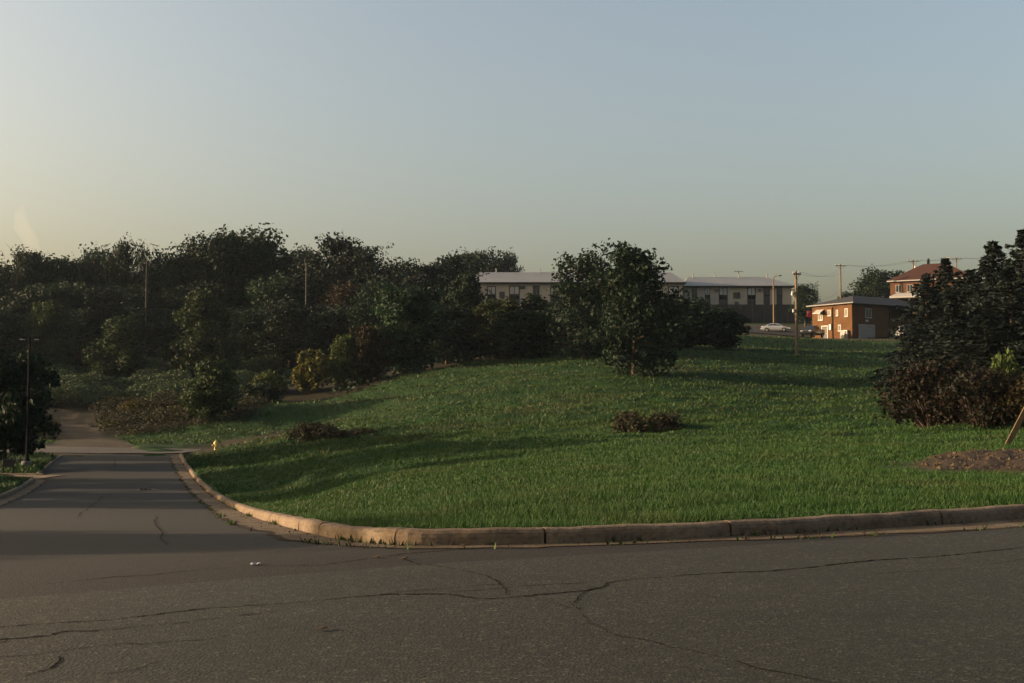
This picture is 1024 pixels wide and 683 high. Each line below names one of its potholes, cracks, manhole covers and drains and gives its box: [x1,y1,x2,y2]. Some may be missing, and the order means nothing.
crack [0,547,1020,683]
